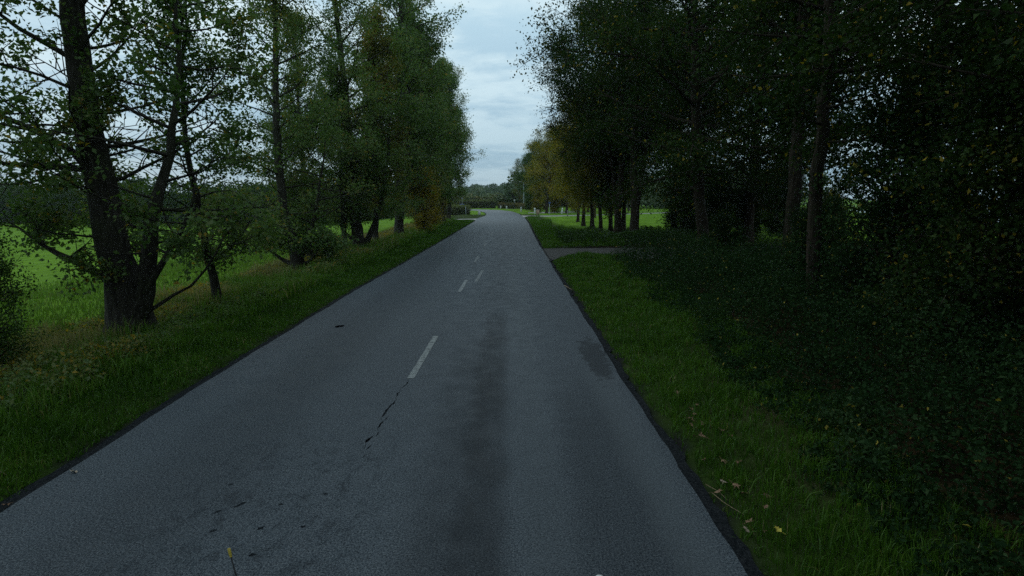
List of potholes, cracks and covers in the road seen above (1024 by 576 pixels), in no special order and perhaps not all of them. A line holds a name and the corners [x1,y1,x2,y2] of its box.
crack [361,381,409,457]
